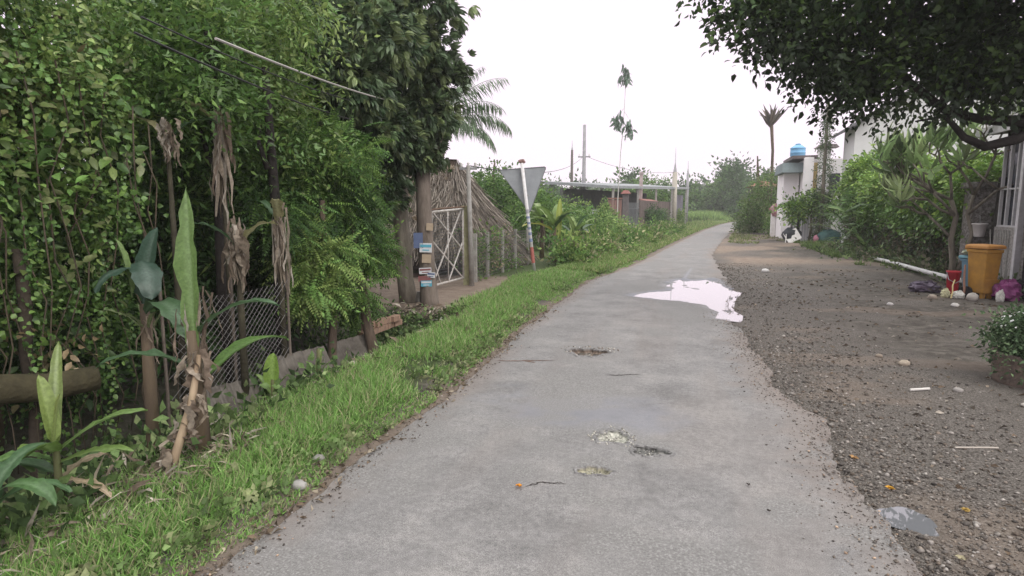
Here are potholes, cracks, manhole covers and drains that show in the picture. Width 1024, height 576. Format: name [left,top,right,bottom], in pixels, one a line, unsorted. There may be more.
pothole [573,465,617,477]
pothole [587,426,637,447]
pothole [628,444,676,458]
pothole [561,346,619,358]
